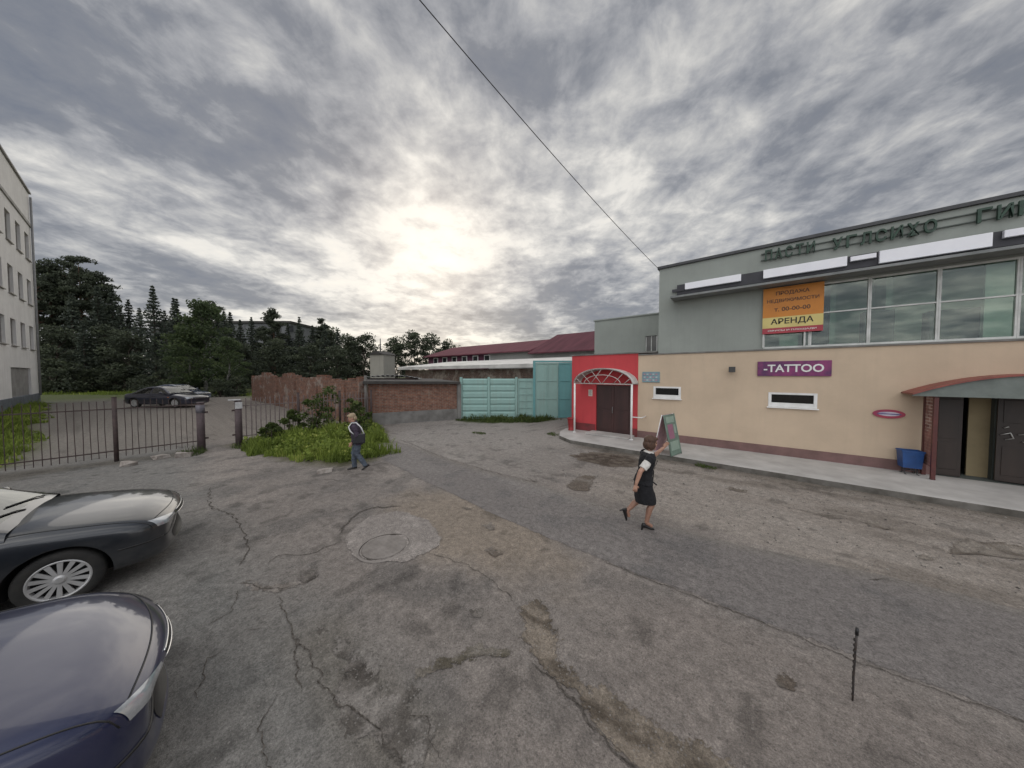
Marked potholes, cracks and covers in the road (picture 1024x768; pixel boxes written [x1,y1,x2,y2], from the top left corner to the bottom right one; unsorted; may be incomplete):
crack [205,487,439,767]
crack [194,649,223,699]
manhole cover [356,533,412,563]
